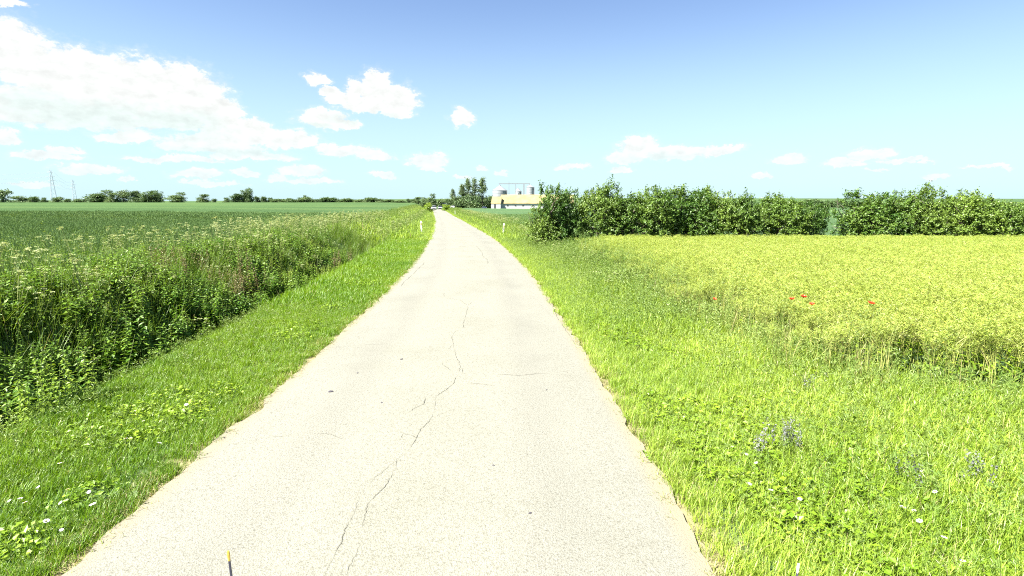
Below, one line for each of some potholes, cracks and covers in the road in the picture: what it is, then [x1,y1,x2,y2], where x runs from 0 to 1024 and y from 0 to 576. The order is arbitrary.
crack [324,303,488,574]
